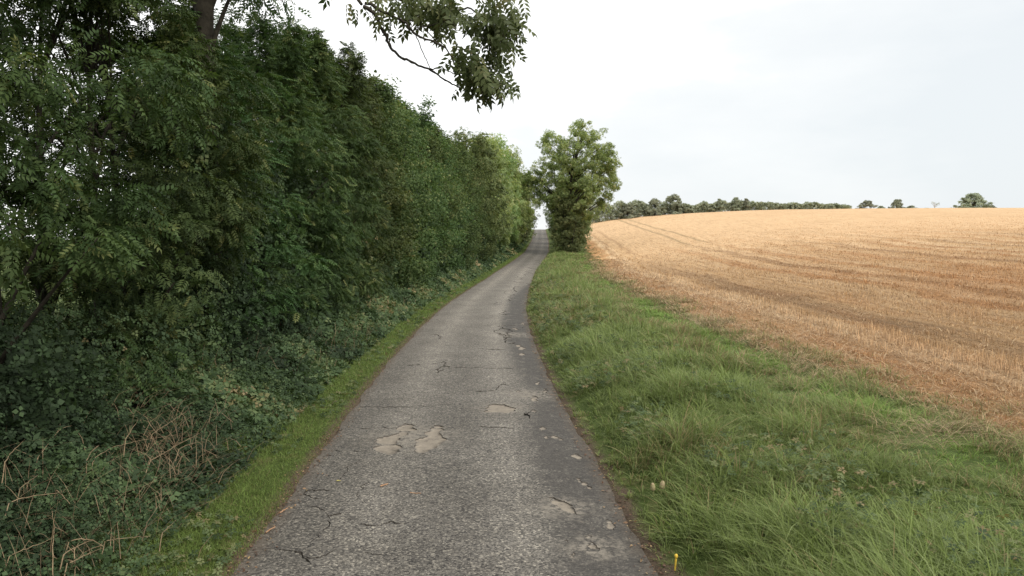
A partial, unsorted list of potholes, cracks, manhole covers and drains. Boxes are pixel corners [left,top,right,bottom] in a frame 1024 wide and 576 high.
crack [263,450,402,564]
pothole [483,404,516,413]
pothole [548,497,578,515]
crack [489,263,540,350]
pothole [414,425,447,455]
pothole [373,423,417,455]
crack [407,360,511,392]
